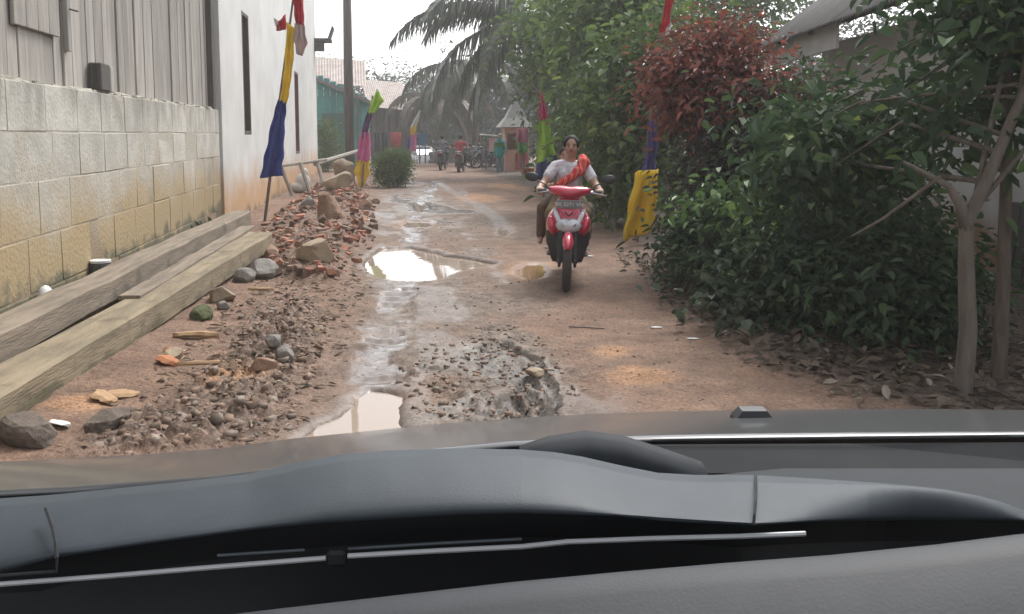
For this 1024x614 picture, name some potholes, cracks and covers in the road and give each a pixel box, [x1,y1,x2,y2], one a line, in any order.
pothole [358,245,503,283]
pothole [509,262,554,280]
pothole [447,335,543,394]
pothole [411,202,430,213]
pothole [286,385,420,439]
